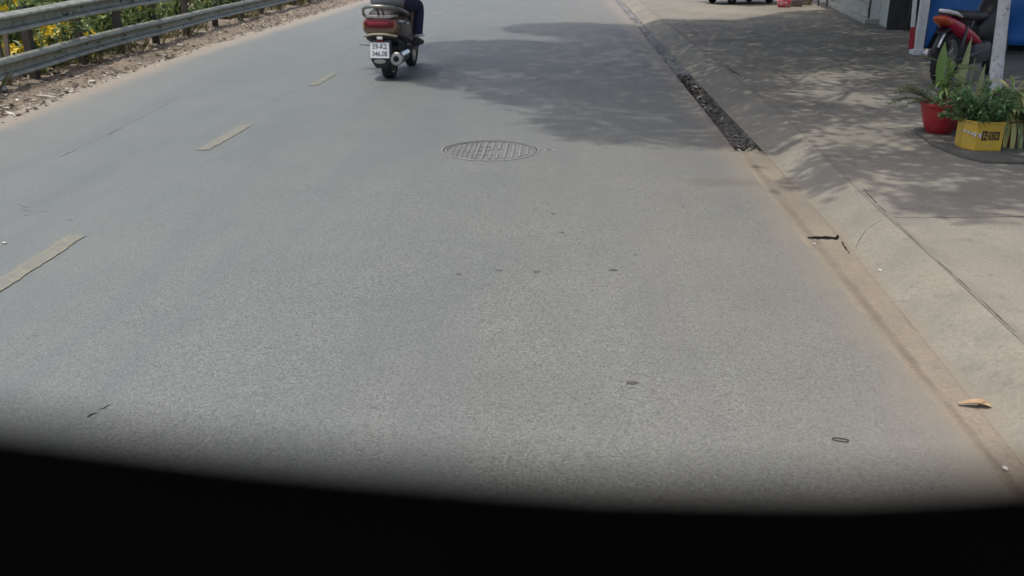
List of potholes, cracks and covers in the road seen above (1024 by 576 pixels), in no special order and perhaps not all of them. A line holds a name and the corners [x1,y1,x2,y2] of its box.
manhole cover [441,140,540,161]
